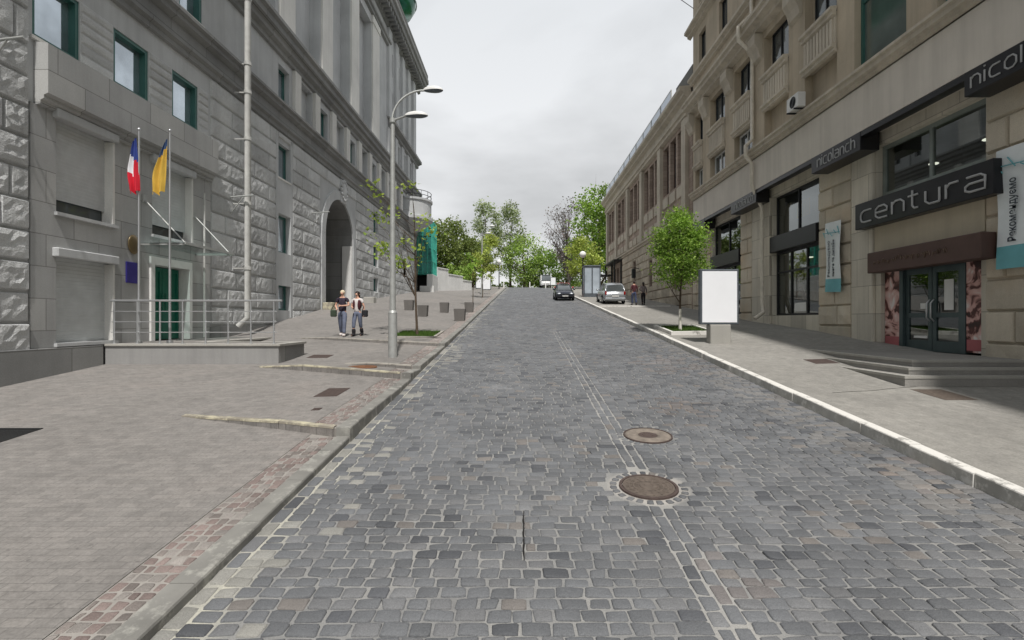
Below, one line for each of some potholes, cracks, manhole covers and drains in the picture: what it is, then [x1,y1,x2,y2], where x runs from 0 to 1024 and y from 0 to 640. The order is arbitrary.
utility cover [313,388,350,397]
manhole cover [619,474,679,500]
manhole cover [623,427,673,444]
utility cover [910,389,977,400]
